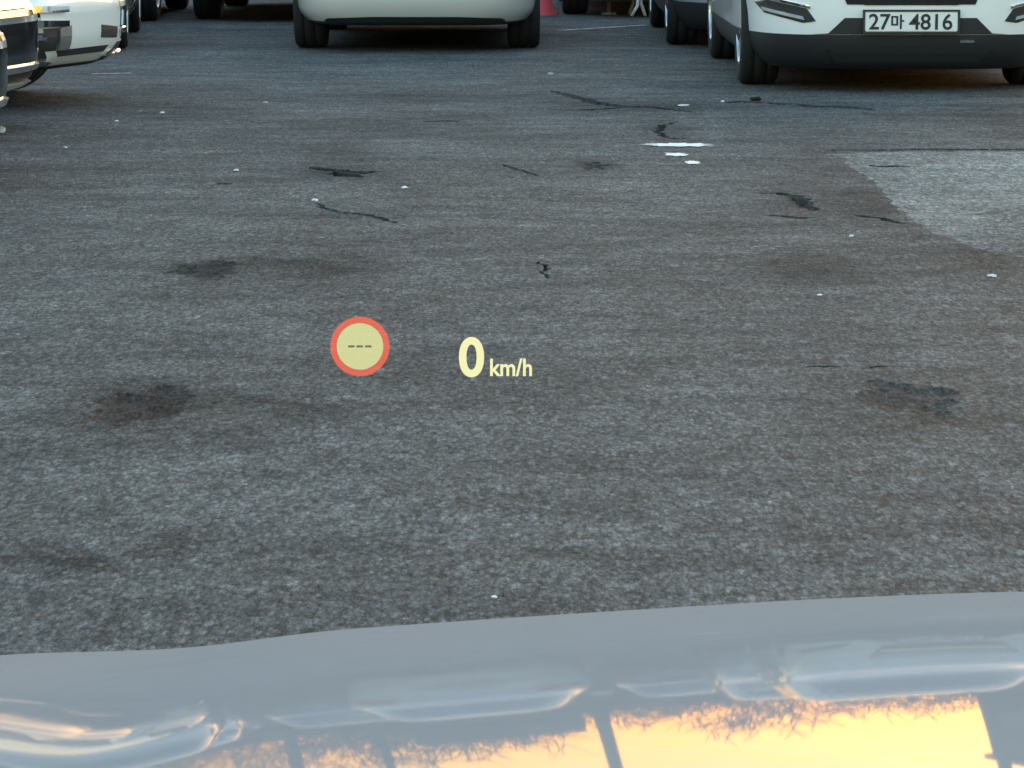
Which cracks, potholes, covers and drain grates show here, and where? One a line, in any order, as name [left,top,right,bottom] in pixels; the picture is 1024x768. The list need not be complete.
crack [550,90,692,139]
crack [309,167,382,178]
crack [754,192,907,224]
crack [536,261,555,280]
crack [501,164,538,176]
crack [315,203,399,224]
